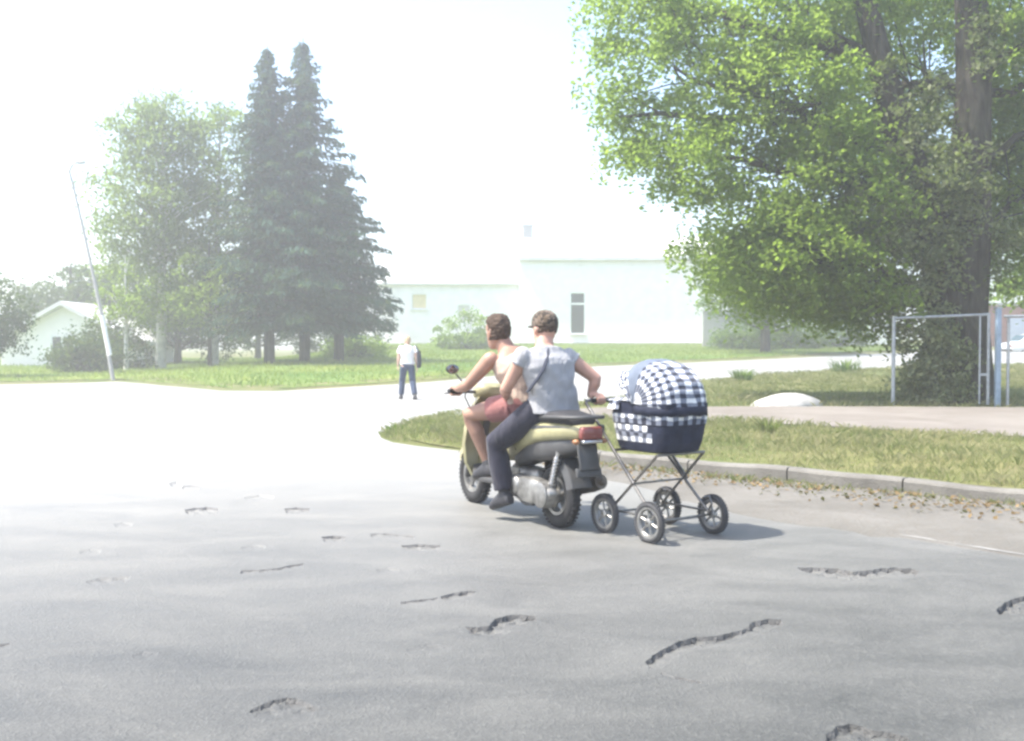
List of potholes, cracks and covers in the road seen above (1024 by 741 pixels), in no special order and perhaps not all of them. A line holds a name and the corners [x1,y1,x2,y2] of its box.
crack [240,563,304,574]
